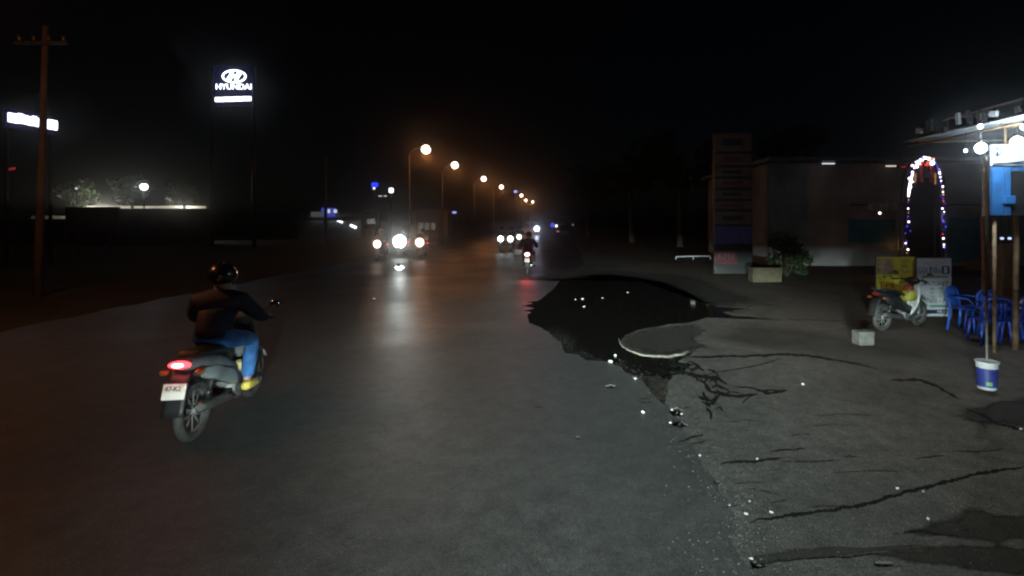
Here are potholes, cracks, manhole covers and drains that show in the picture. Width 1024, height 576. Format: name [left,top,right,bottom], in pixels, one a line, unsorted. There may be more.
crack [893,378,1024,432]
crack [722,482,788,509]
crack [636,353,876,444]
crack [721,414,898,473]
